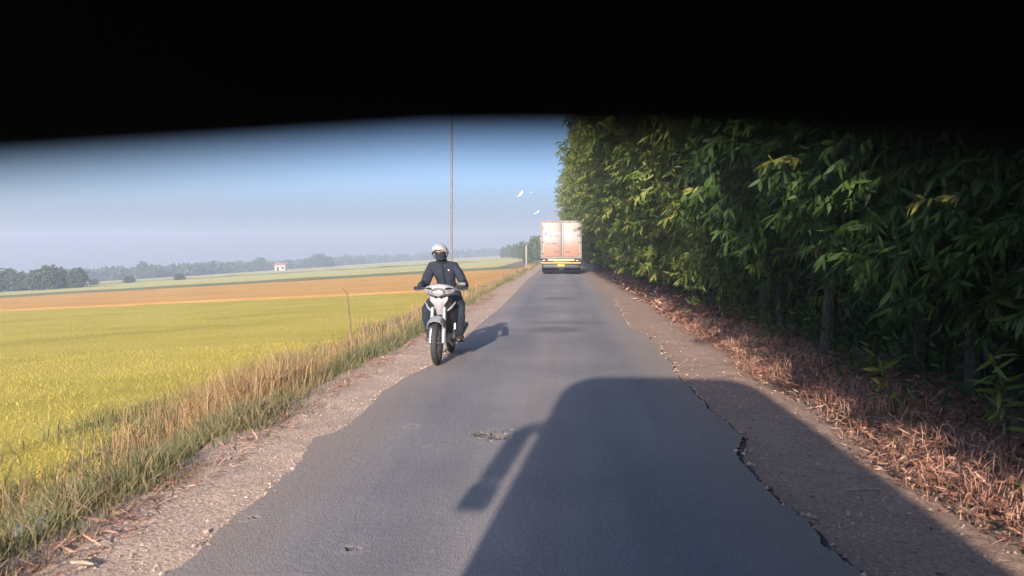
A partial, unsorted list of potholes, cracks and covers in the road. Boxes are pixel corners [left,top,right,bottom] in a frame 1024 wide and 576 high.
pothole [332,543,369,555]
crack [630,328,863,573]
